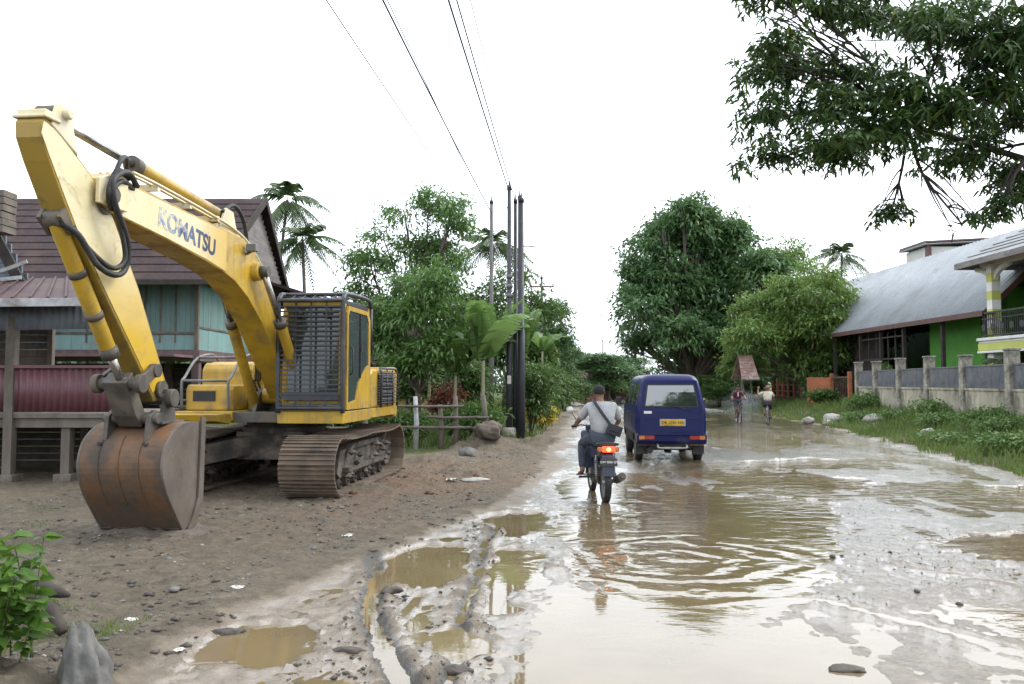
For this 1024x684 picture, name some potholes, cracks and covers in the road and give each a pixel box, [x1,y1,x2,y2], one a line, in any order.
pothole [469,507,559,538]
pothole [358,539,481,596]
pothole [160,616,325,676]
pothole [465,541,560,618]
